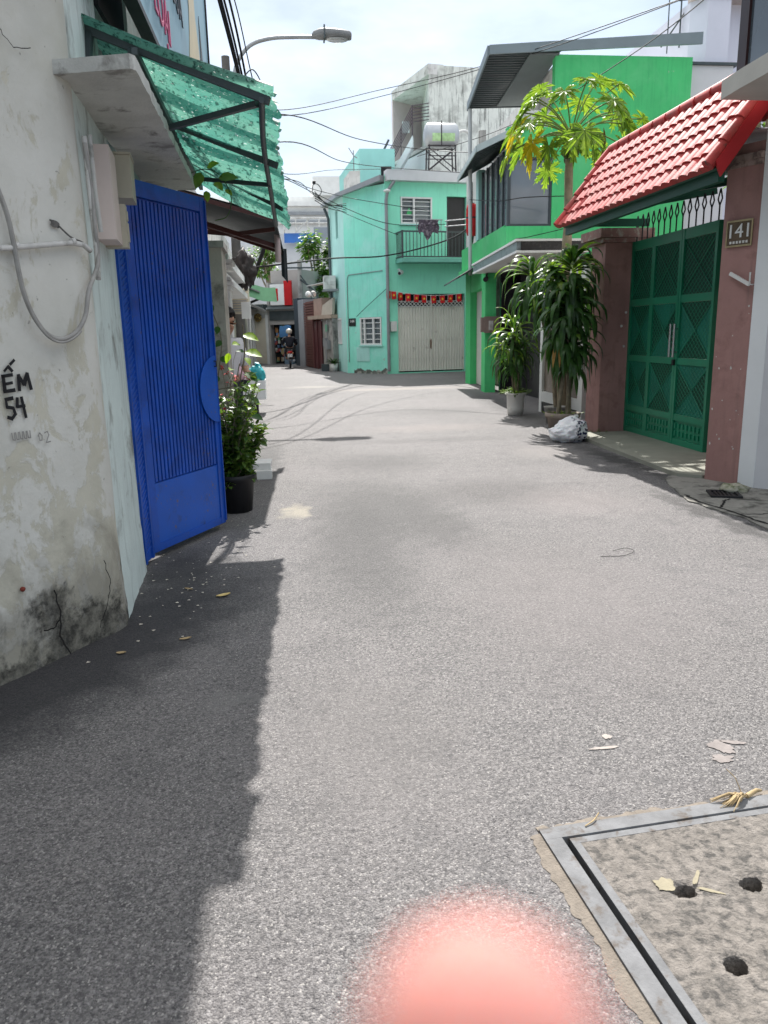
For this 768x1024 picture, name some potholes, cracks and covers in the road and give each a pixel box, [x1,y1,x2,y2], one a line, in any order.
manhole cover [530,790,768,1024]
drain grate [706,489,743,499]
